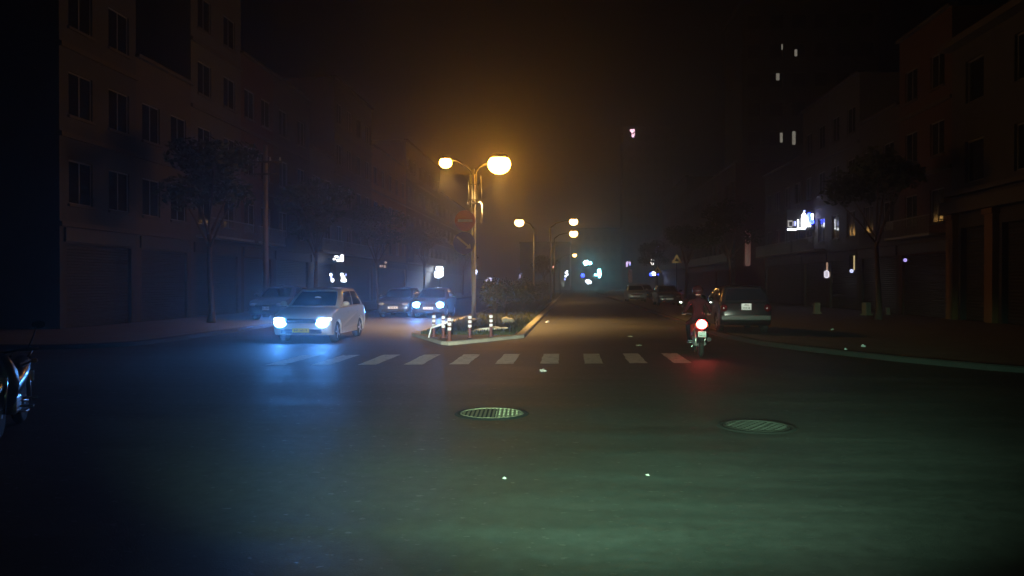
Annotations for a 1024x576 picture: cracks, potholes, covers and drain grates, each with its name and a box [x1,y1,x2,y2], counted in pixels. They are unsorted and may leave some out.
manhole cover [454,407,529,420]
manhole cover [717,419,798,434]
